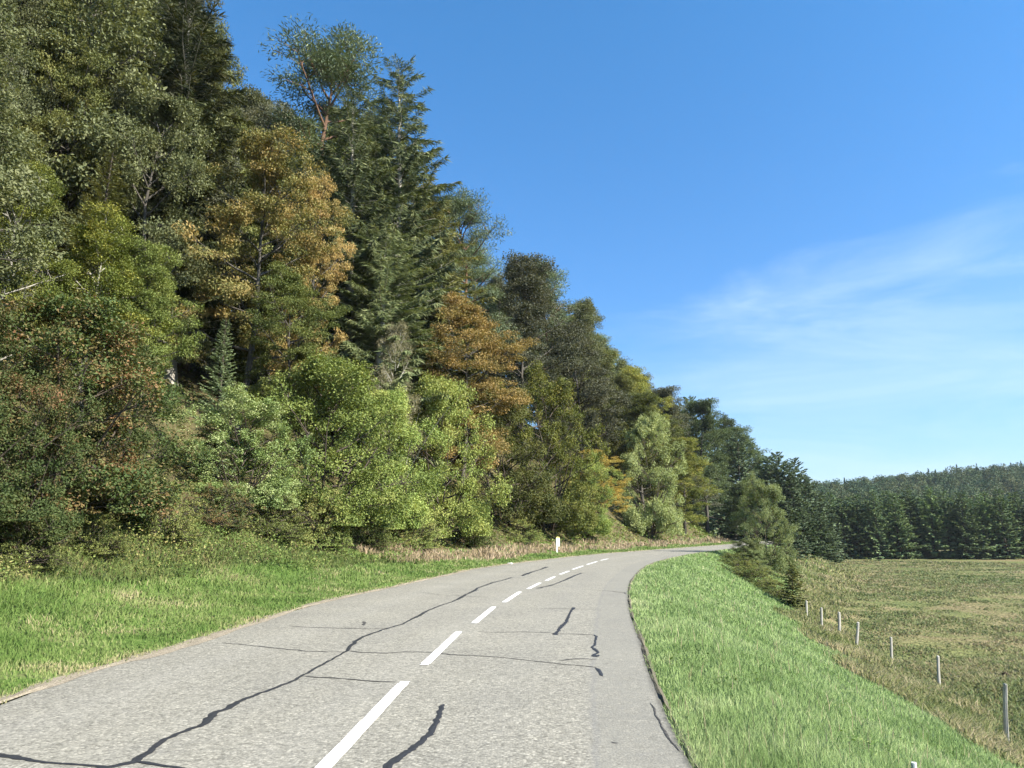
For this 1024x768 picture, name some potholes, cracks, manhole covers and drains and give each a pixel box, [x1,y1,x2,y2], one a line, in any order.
crack [228,632,603,676]
crack [650,703,680,751]
